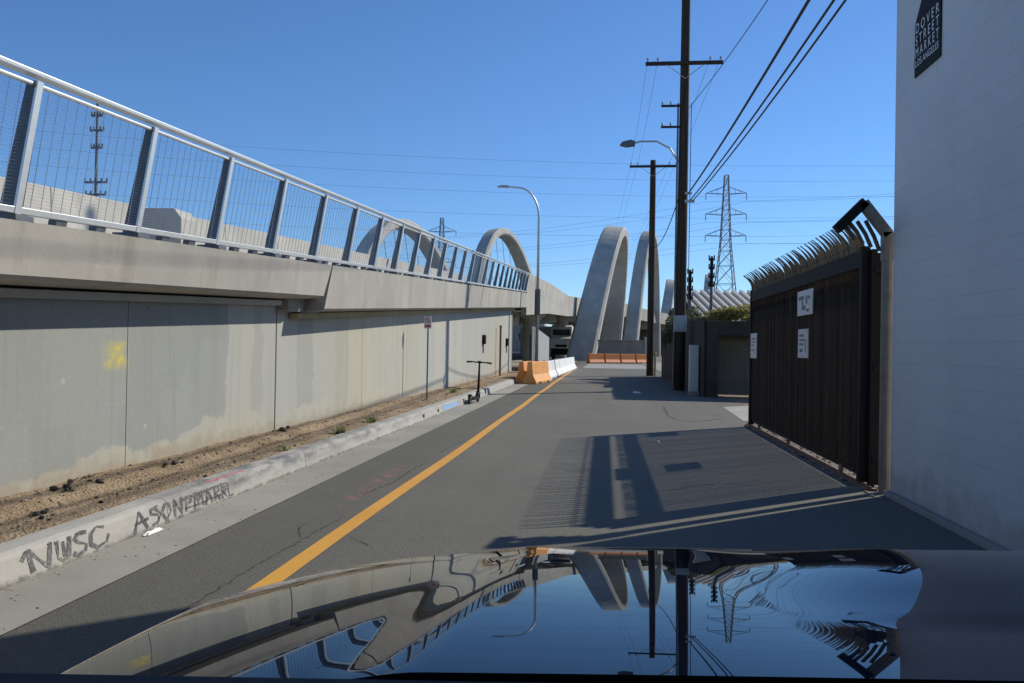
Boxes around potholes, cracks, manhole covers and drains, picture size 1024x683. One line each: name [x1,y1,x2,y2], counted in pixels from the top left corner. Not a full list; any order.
crack [168,517,375,619]
